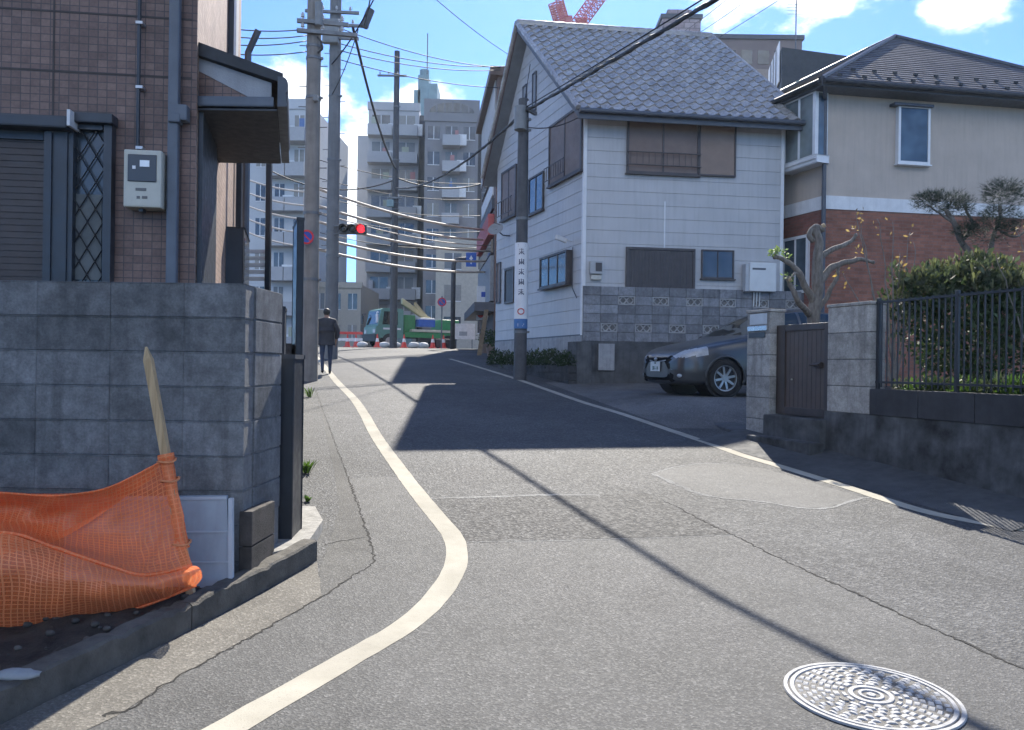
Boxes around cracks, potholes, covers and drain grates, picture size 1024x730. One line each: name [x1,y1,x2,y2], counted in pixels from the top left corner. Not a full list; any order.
manhole cover [783,662,968,730]
crack [101,395,376,717]
